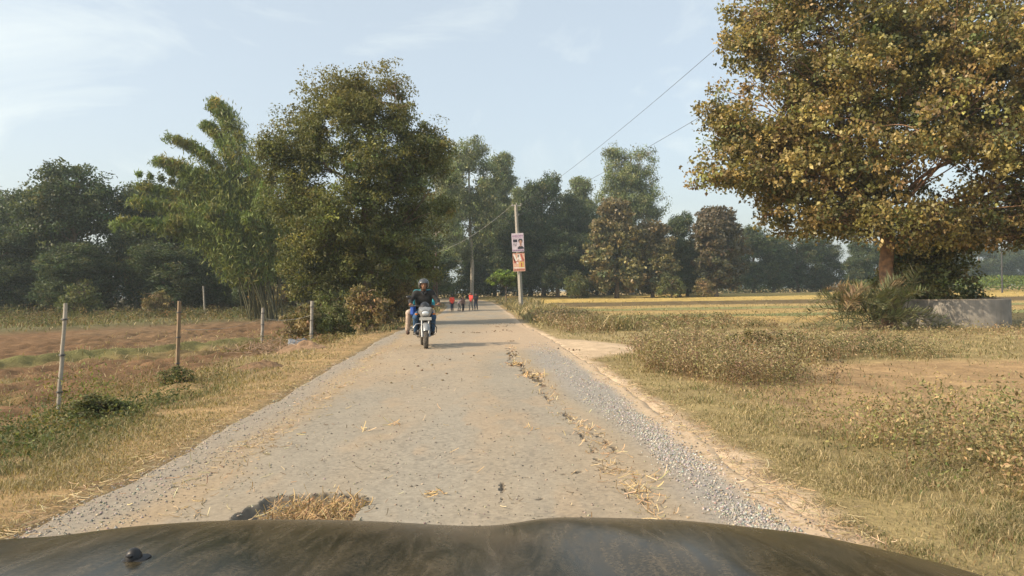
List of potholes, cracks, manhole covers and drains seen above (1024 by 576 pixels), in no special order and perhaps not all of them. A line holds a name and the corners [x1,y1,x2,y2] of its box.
crack [505,348,619,475]
crack [622,488,655,506]
pothole [229,492,376,521]
